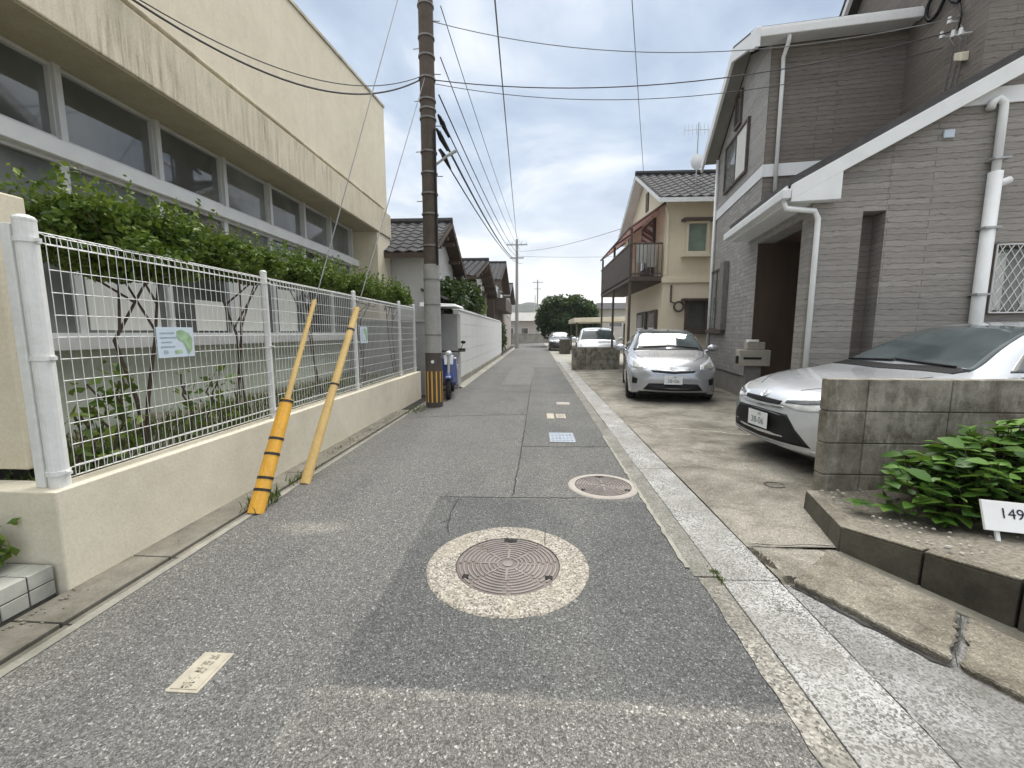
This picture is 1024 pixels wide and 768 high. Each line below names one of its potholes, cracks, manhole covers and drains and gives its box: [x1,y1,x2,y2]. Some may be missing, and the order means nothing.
manhole cover [426,527,589,619]
manhole cover [568,474,638,500]
crack [790,585,962,667]
